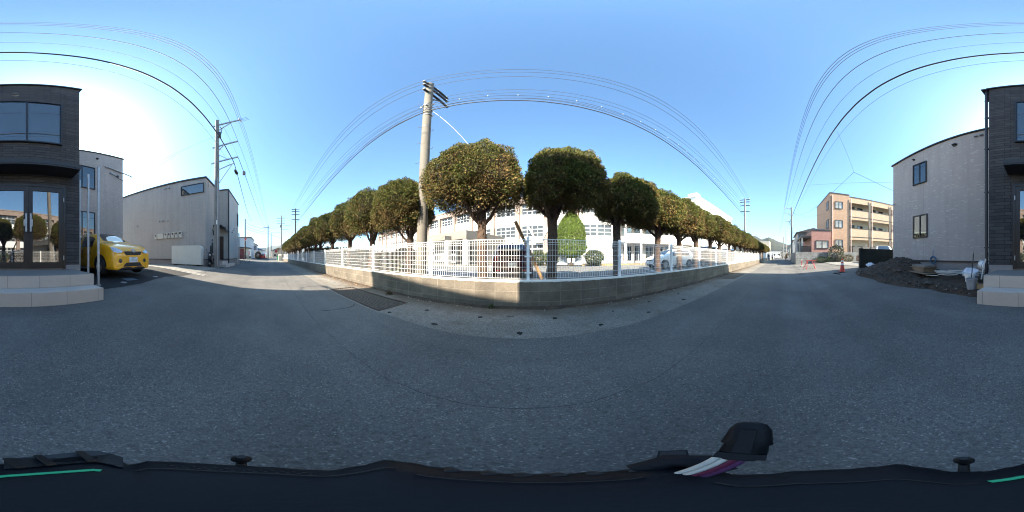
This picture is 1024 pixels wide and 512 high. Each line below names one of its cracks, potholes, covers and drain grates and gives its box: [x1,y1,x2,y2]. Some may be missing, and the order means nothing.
drain grate [330,287,408,311]
